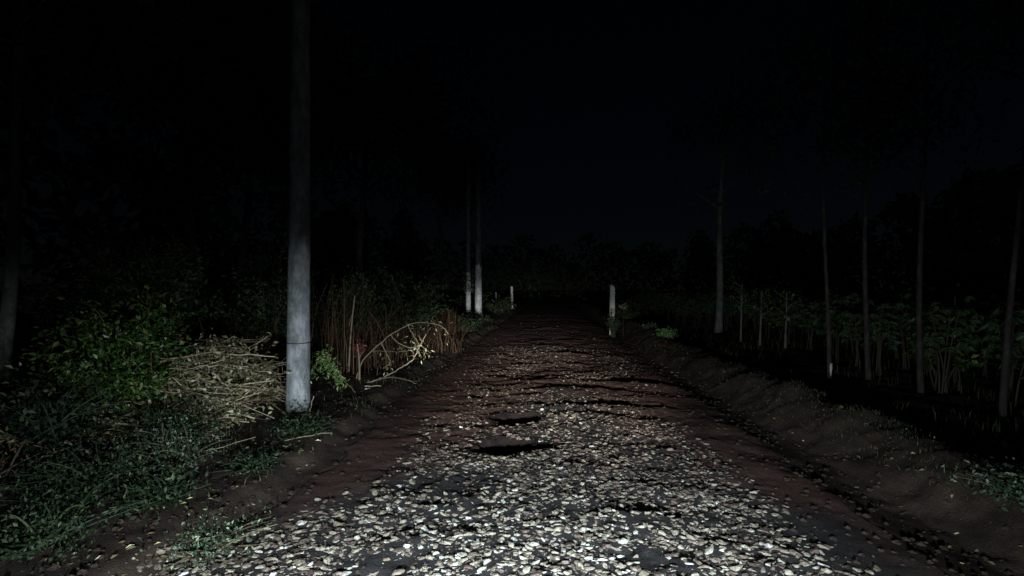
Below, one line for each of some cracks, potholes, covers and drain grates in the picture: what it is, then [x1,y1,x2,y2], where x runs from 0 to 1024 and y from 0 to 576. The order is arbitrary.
pothole [464,435,563,456]
pothole [485,410,551,426]
